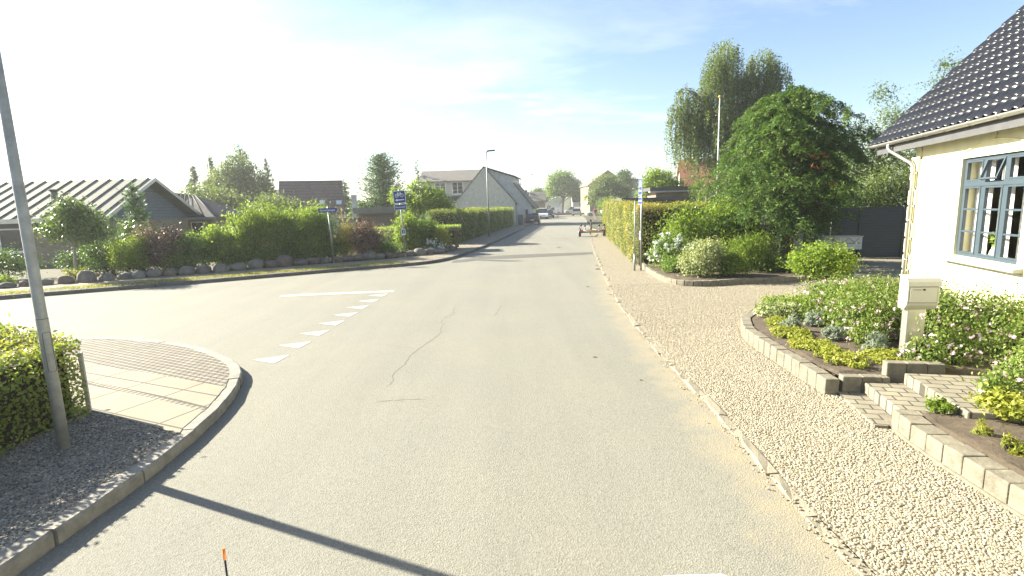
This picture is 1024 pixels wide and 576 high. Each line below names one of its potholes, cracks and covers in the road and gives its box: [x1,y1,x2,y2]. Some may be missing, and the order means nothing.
crack [376,310,455,403]
